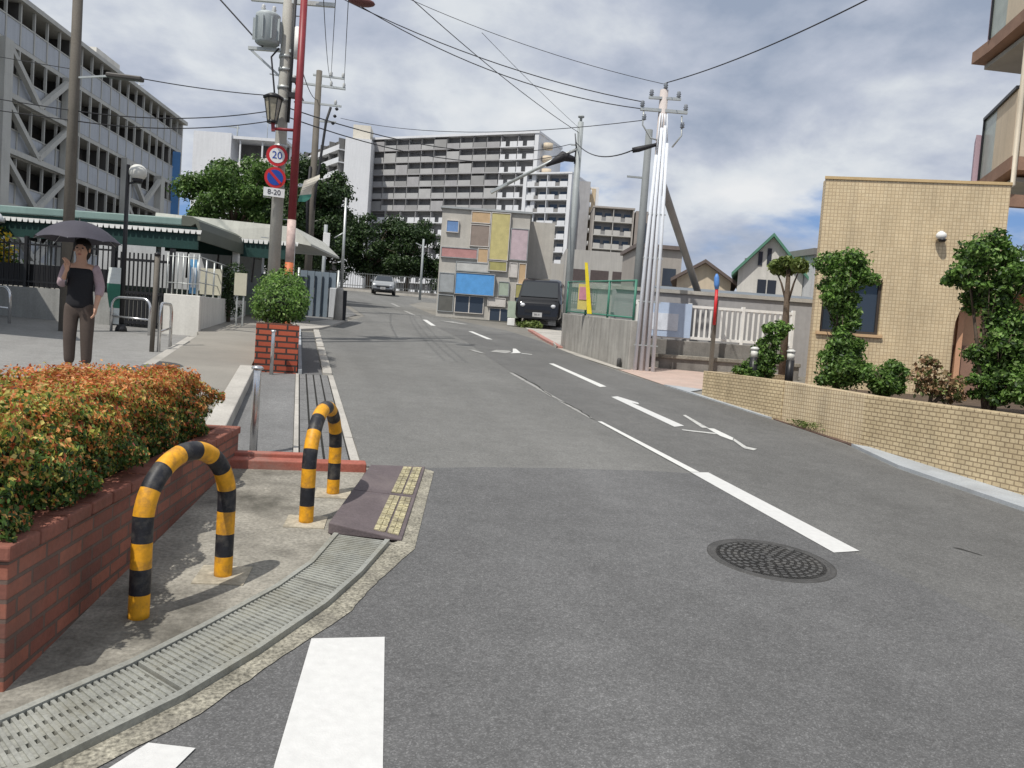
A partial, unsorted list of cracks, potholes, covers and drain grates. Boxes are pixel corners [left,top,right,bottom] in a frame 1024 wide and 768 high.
manhole cover [707,539,837,583]
drain grate [0,532,390,768]
